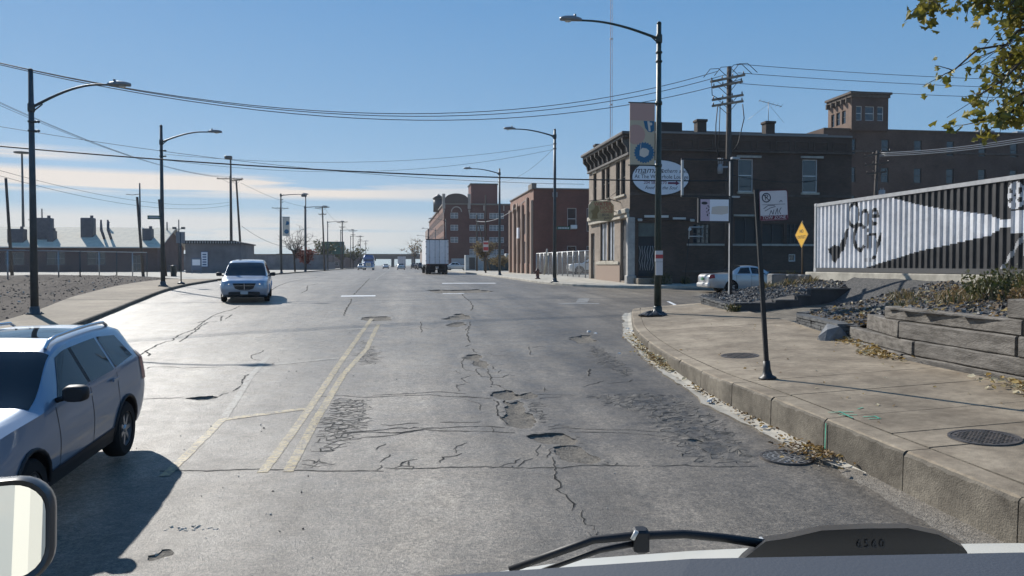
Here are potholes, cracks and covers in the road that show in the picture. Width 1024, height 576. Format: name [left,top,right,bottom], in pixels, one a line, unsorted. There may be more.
pothole [569,335,597,344]
crack [302,346,545,470]
crack [499,344,755,537]
pothole [148,549,174,561]
manhole cover [947,429,1023,446]
pothole [463,354,489,369]
pothole [501,400,536,429]
pothole [553,445,602,464]
pothole [526,433,578,446]
pothole [490,390,522,400]
crack [140,306,240,369]
